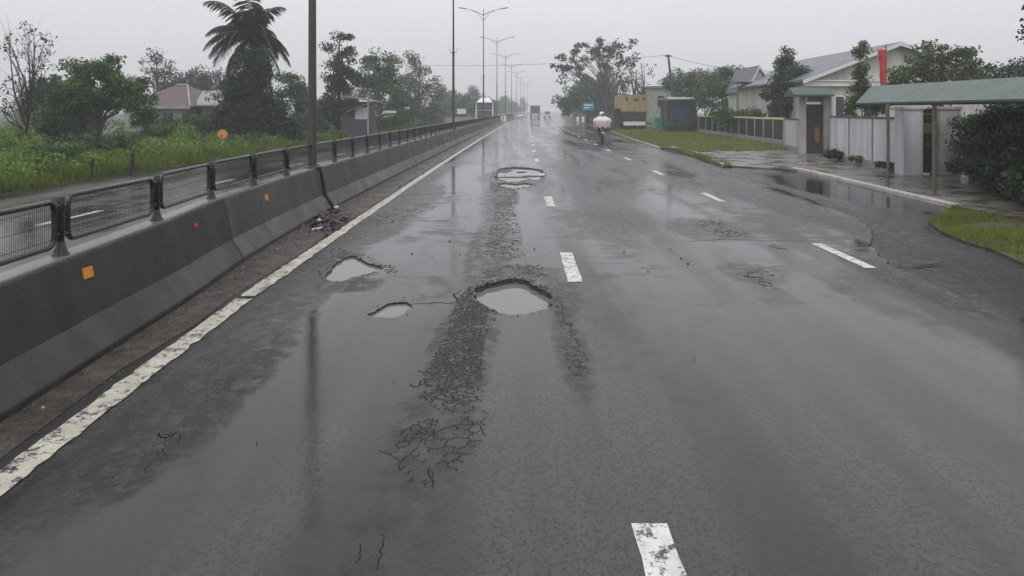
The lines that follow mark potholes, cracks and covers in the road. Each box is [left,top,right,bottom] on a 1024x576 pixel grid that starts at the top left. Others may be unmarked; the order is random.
pothole [320,255,383,282]
crack [743,269,776,287]
pothole [465,277,561,317]
crack [144,431,182,473]
pothole [493,166,545,182]
crack [379,182,547,488]
crack [356,534,385,569]
crack [553,296,589,376]
pothole [367,297,412,319]
crack [686,221,816,242]
